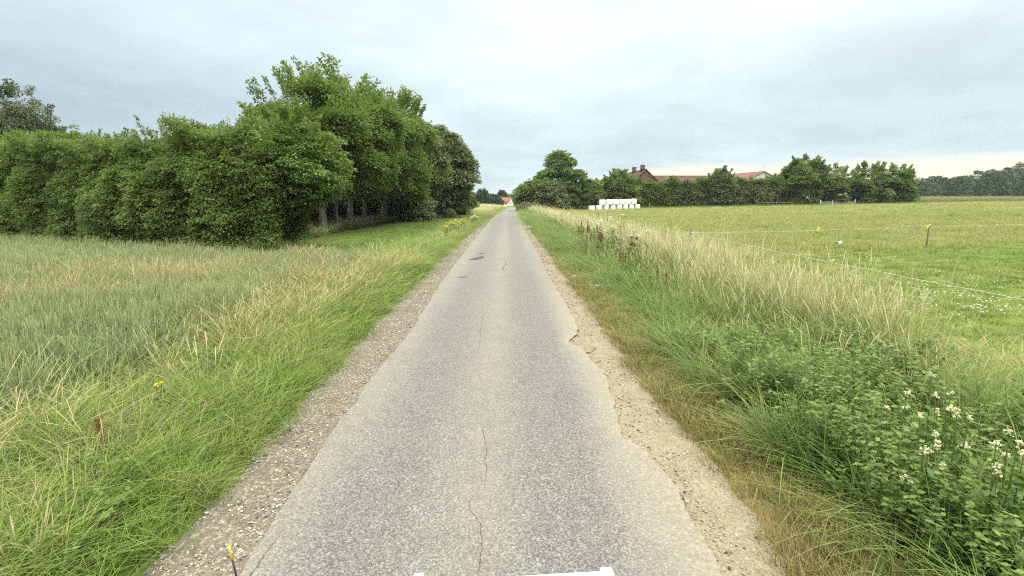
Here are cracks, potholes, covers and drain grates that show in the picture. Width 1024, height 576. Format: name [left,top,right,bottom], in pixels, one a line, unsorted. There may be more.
crack [468,426,487,576]
